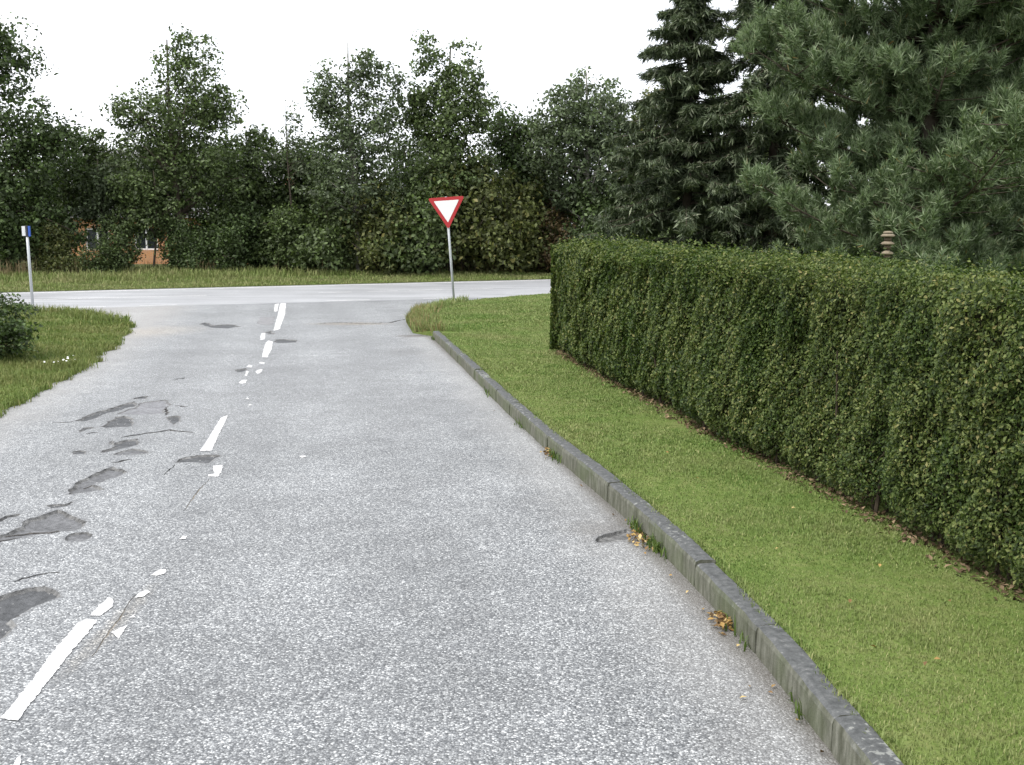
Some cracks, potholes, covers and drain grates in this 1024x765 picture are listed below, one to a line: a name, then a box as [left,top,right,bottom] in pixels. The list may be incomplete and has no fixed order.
crack [125,406,193,437]
crack [13,572,60,582]
